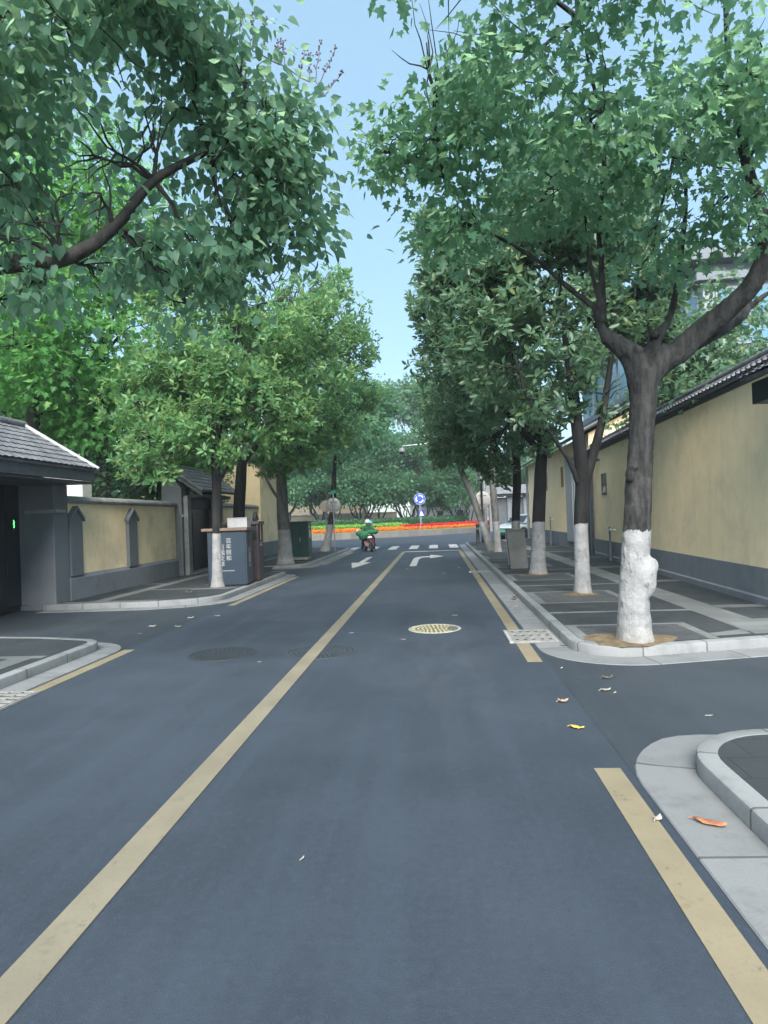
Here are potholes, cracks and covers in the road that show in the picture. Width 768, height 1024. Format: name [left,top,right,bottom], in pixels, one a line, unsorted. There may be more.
manhole cover [187,647,257,662]
manhole cover [408,624,461,634]
drain grate [503,629,559,644]
manhole cover [285,644,357,660]
drain grate [0,691,41,711]
